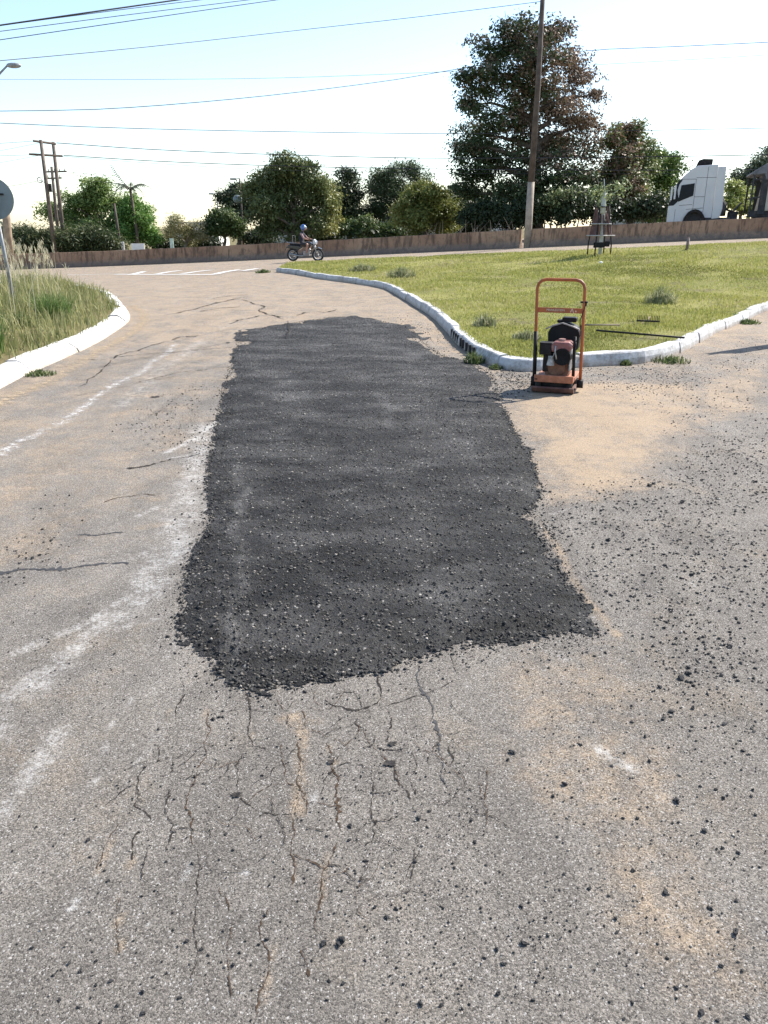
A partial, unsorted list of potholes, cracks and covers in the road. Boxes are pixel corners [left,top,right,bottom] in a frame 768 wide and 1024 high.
crack [96,658,509,1001]
crack [178,295,337,338]
crack [81,336,231,386]
